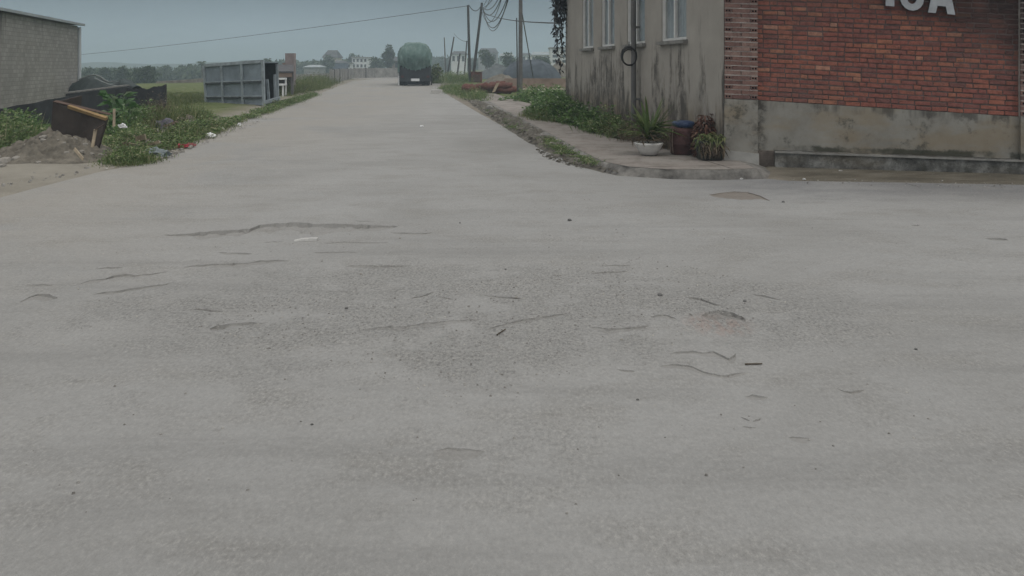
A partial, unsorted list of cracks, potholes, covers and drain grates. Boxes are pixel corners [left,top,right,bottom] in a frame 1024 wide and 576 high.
crack [588,297,719,334]
crack [359,295,569,331]
pothole [702,310,745,321]
crack [433,447,484,461]
crack [660,351,768,429]
crack [79,241,286,295]
